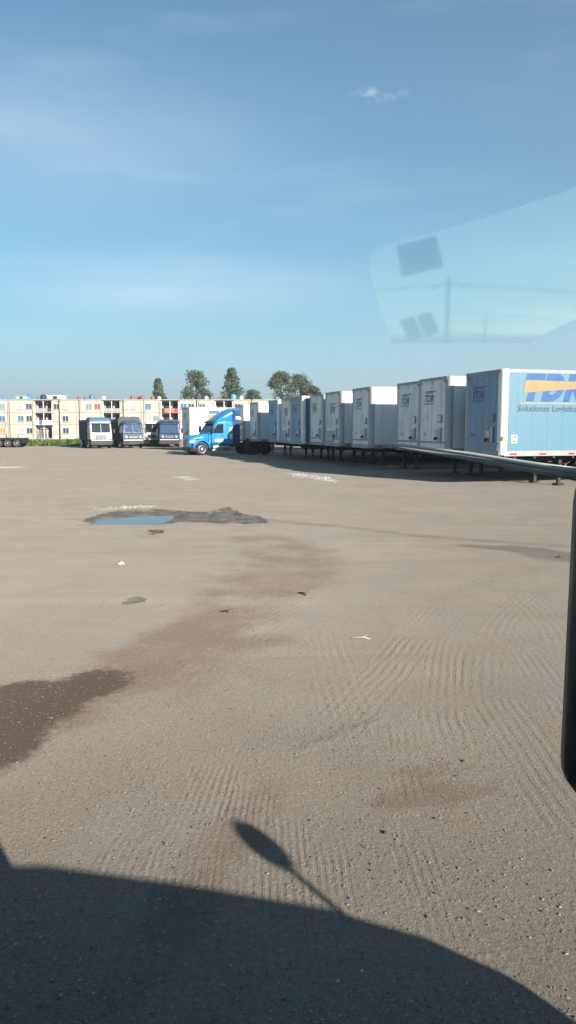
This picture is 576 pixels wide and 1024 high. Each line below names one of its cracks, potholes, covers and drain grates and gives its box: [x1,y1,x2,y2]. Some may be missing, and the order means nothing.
pothole [69,506,278,527]
